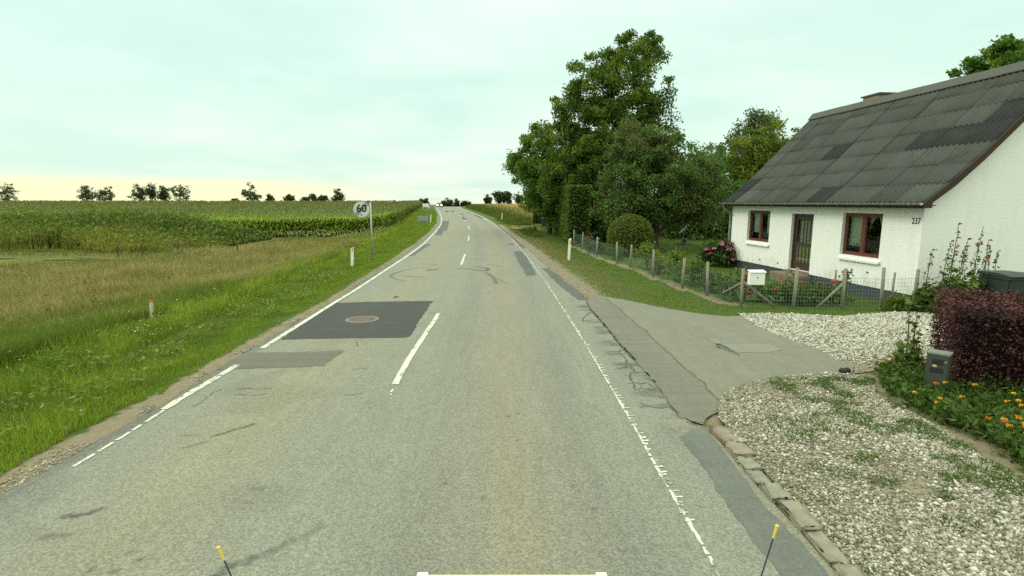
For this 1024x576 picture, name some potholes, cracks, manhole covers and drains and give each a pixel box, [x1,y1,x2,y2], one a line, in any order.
crack [193,387,271,406]
crack [575,290,719,427]
